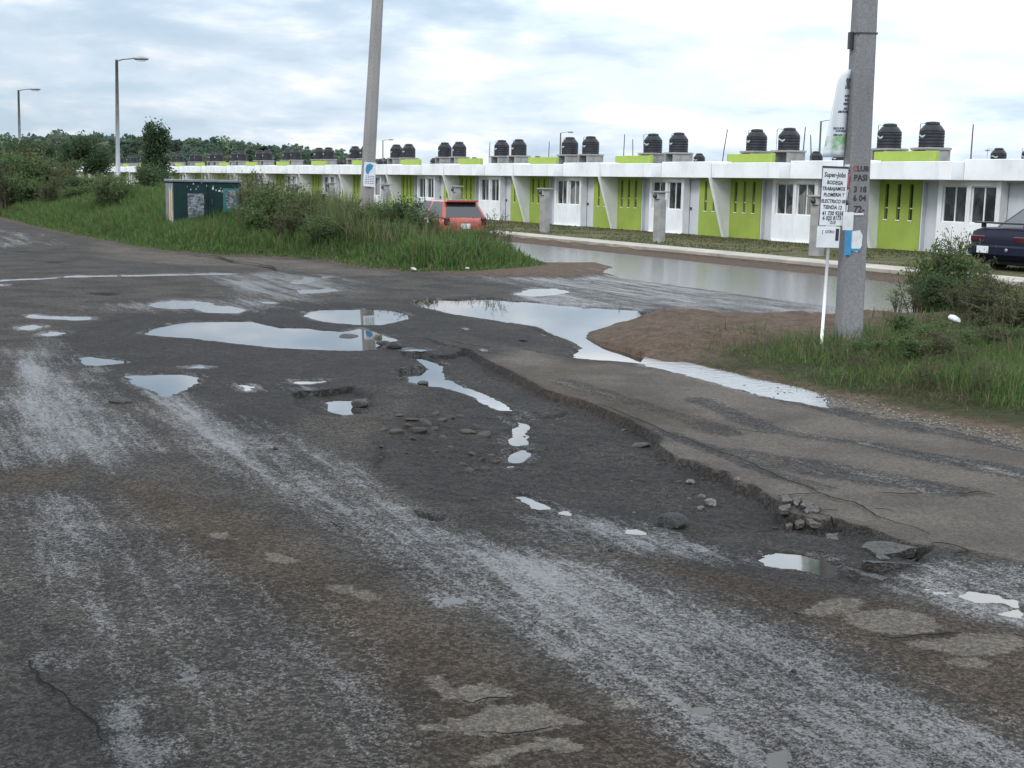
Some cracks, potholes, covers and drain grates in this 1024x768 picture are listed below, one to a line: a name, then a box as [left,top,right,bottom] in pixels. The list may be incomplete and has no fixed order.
crack [778,493,837,530]
crack [492,726,552,734]
pothole [134,320,402,351]
pothole [115,371,206,398]
crack [27,659,103,741]
pothole [360,338,940,589]
pothole [284,379,384,417]
